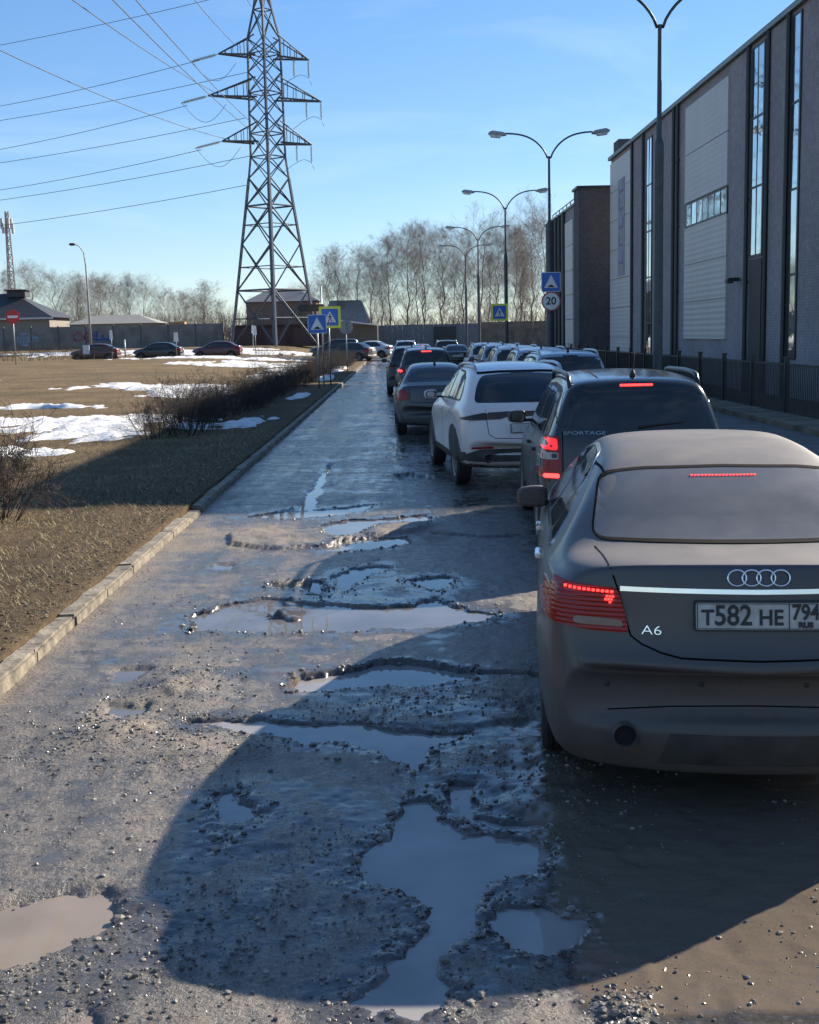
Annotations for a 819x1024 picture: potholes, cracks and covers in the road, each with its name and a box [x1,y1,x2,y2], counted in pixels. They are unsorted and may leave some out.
pothole [407,774,554,849]
pothole [394,573,464,594]
pothole [275,657,484,694]
pothole [310,564,399,595]
pothole [166,712,484,777]
pothole [259,577,332,600]
pothole [390,472,435,481]
pothole [314,536,415,553]
pothole [239,503,381,520]
pothole [180,594,511,635]
pothole [316,513,436,536]
